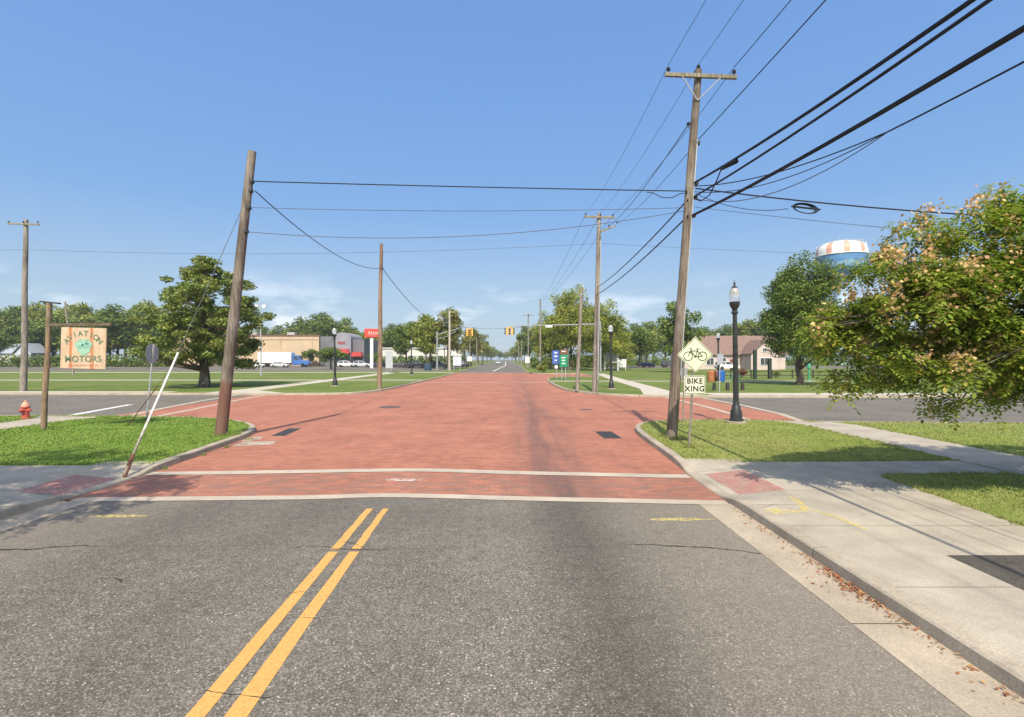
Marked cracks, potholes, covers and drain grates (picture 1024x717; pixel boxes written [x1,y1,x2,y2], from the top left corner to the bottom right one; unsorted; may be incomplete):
crack [0,542,761,554]
